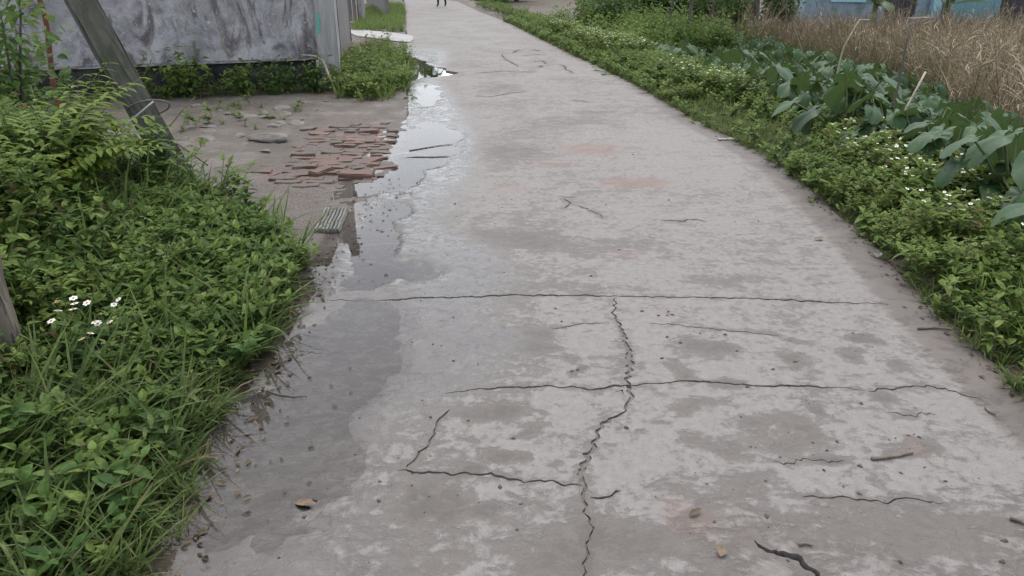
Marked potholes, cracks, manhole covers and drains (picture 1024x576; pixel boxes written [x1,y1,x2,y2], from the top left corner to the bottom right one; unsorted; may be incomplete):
crack [484,49,572,73]
crack [330,294,981,576]
